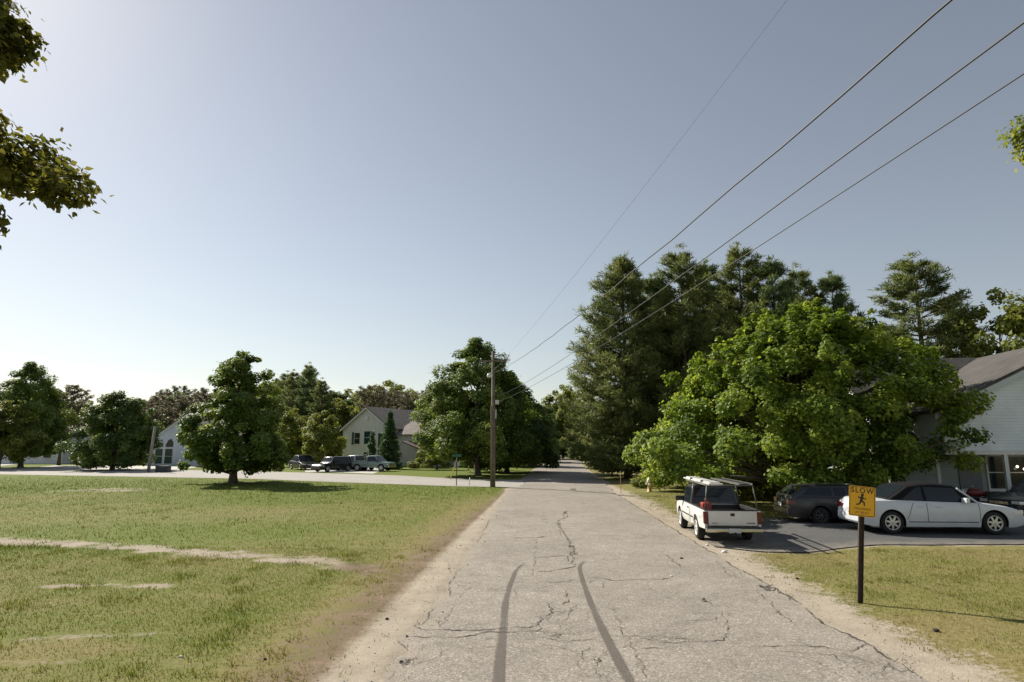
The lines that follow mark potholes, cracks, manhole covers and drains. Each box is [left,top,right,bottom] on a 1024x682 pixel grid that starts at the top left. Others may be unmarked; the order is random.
crack [616,494,915,675]
crack [388,512,730,679]
